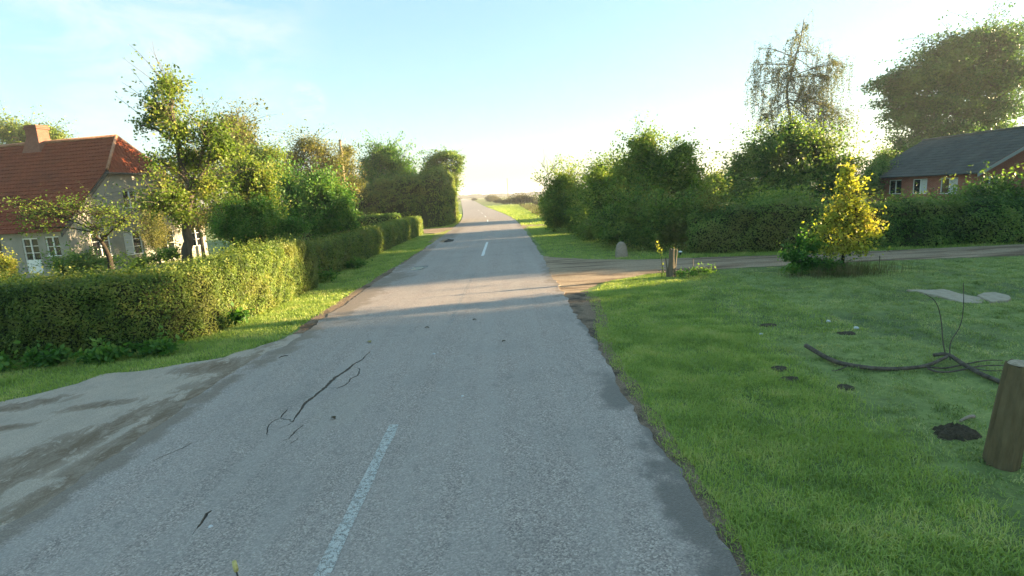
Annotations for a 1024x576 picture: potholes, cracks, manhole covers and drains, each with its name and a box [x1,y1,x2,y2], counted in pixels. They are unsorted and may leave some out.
crack [266,352,370,444]
crack [192,510,212,535]
